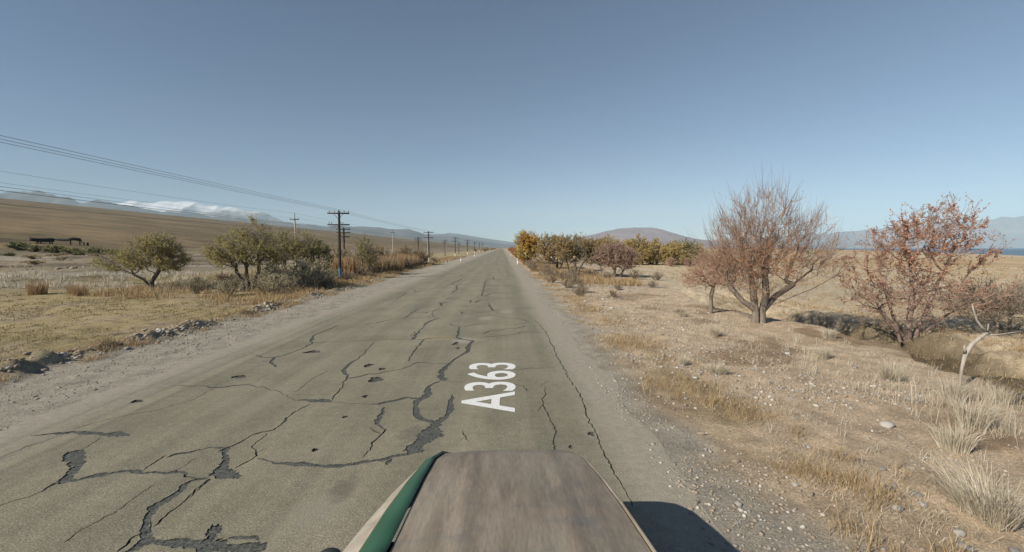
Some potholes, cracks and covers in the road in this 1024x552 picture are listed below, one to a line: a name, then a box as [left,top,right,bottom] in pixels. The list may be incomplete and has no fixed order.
crack [0,277,544,552]
crack [514,367,557,450]
